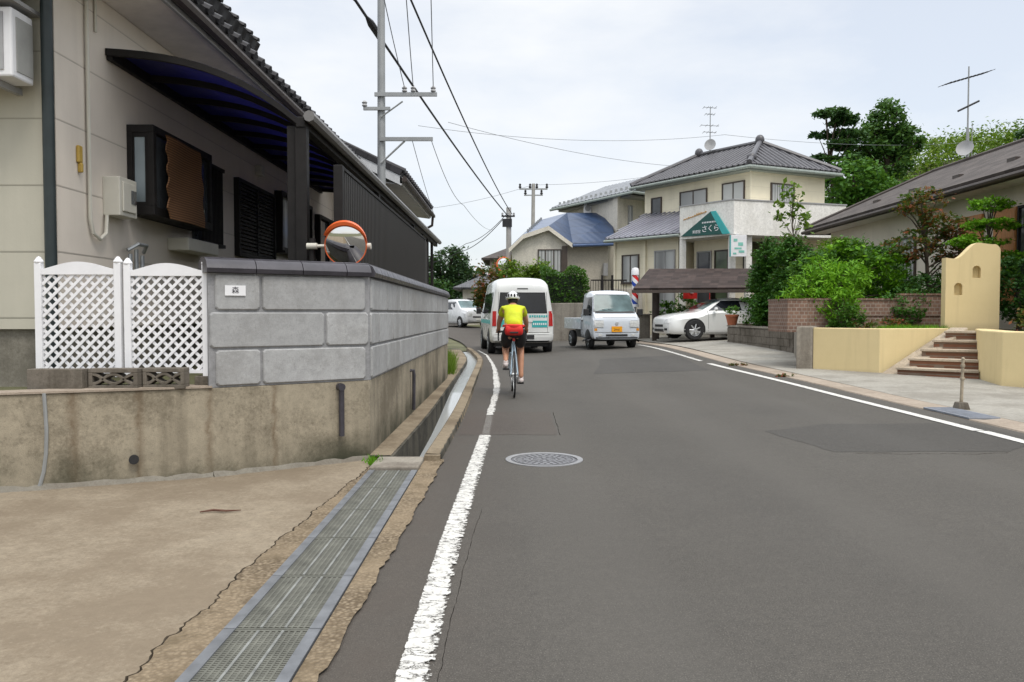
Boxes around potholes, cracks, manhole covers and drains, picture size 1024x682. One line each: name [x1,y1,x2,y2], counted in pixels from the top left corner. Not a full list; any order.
drain grate [333,487,407,512]
drain grate [273,538,376,578]
drain grate [307,509,393,540]
manhole cover [506,452,583,467]
drain grate [224,575,353,632]
drain grate [175,629,321,682]
drain grate [354,470,417,488]
